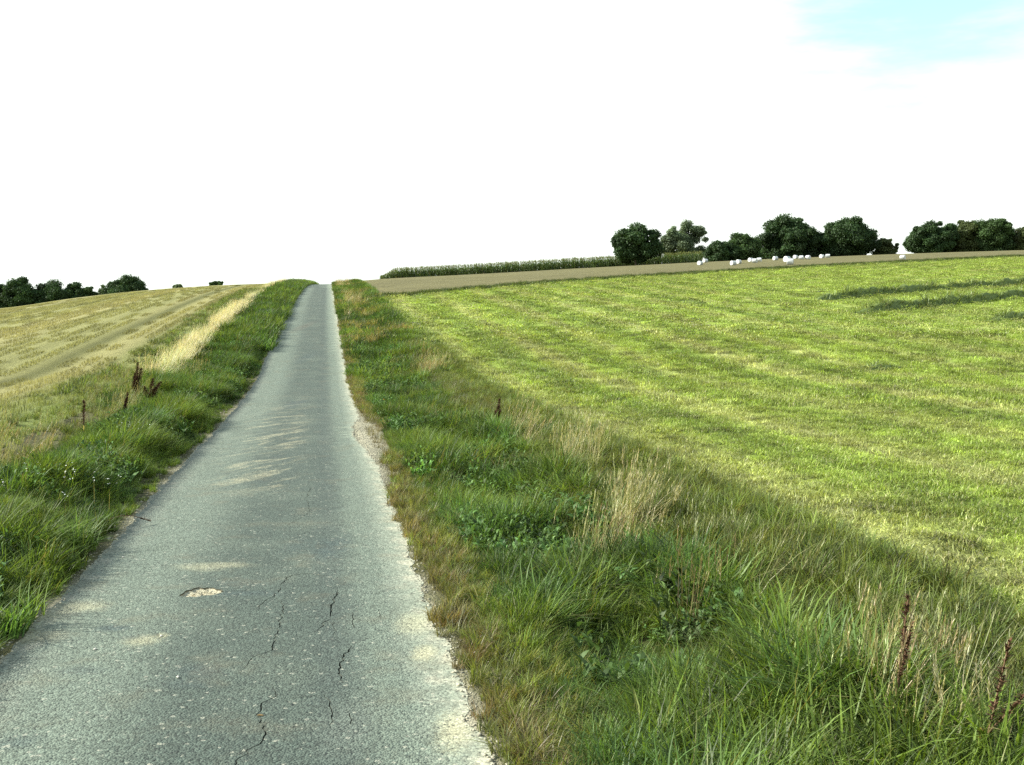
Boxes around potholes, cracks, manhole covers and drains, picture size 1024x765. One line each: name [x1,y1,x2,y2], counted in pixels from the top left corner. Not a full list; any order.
crack [235,684,277,765]
pothole [179,587,221,597]
crack [221,573,354,729]
